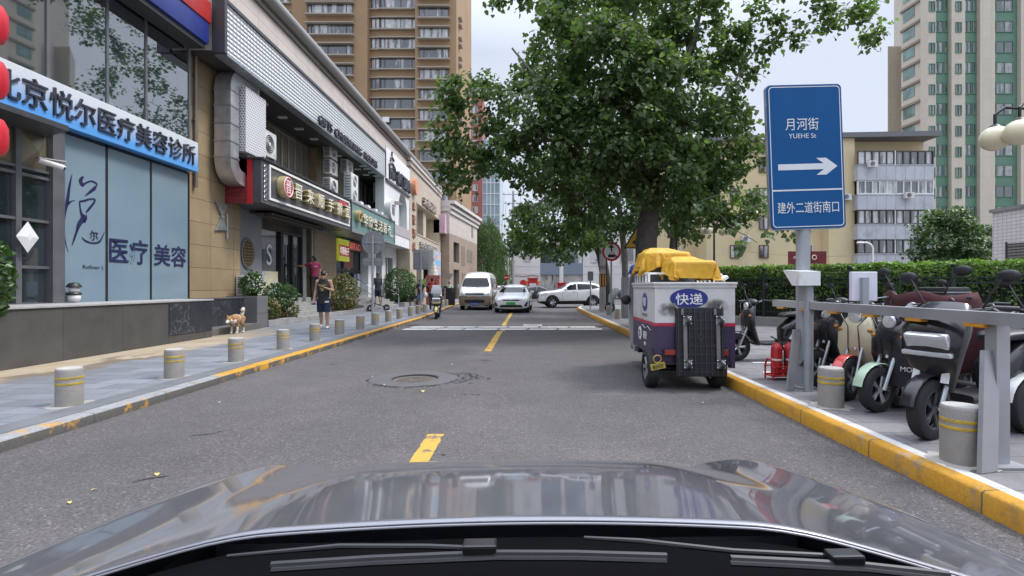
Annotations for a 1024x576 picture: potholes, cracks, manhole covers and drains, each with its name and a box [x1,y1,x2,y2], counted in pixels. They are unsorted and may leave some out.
manhole cover [369,371,458,387]
